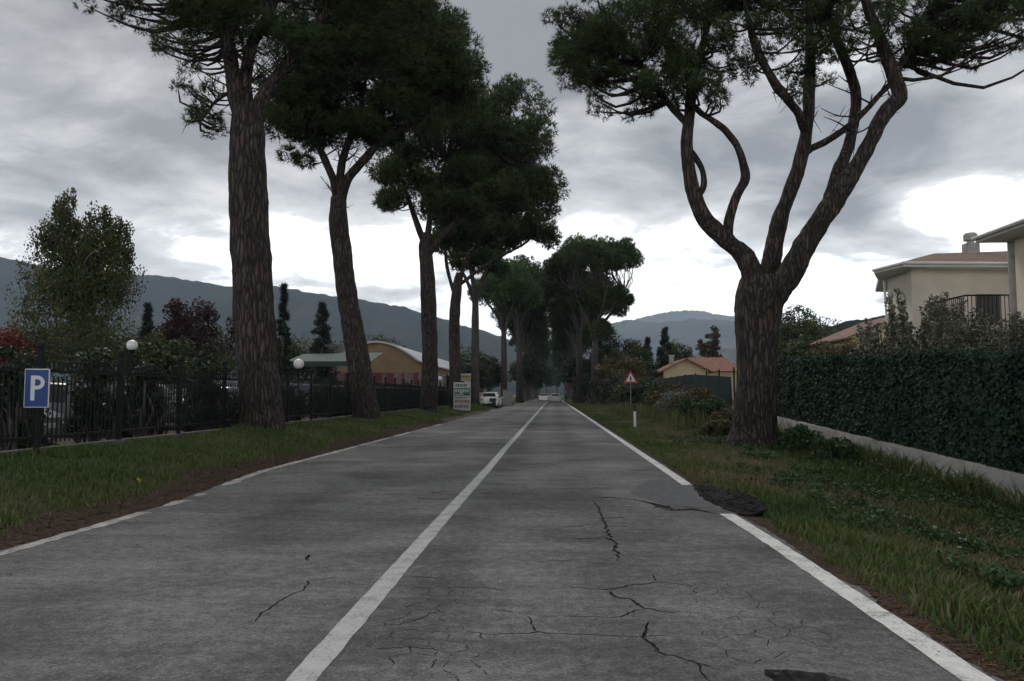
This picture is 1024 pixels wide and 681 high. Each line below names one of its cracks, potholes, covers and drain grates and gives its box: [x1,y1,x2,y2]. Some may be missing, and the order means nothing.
crack [367,573,487,681]
crack [252,577,331,624]
pothole [693,484,767,517]
crack [475,497,852,681]
pothole [764,669,850,681]
